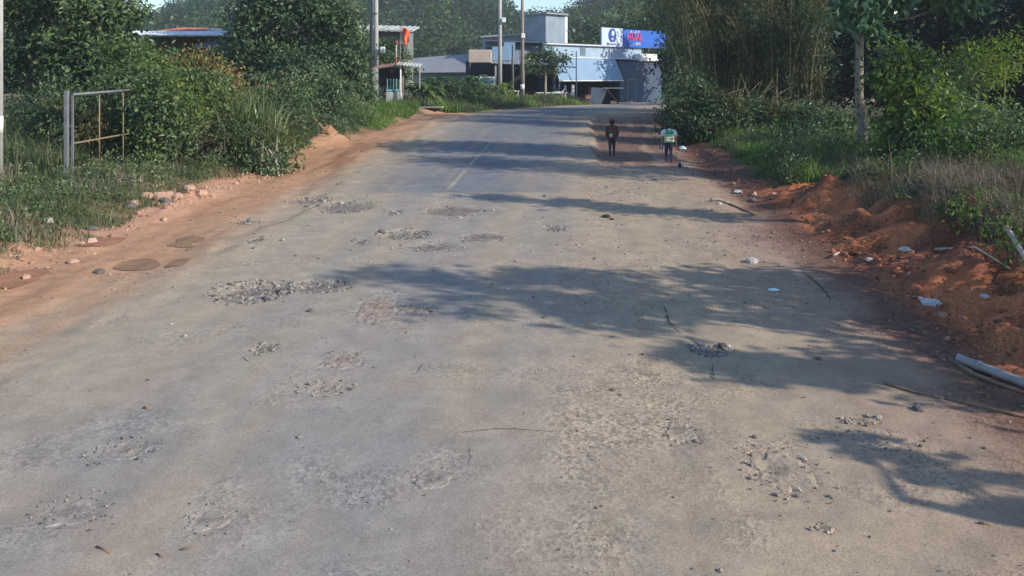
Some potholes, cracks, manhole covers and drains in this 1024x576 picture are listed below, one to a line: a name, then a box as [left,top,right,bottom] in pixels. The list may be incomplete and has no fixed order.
pothole [687,343,737,357]
pothole [659,417,705,446]
pothole [304,199,374,214]
pothole [406,462,463,497]
pothole [730,437,839,504]
pothole [204,279,298,306]
pothole [250,341,280,355]
pothole [459,233,515,243]
pothole [420,205,495,218]
pothole [80,435,164,466]
pothole [284,196,334,205]
pothole [288,278,353,294]
